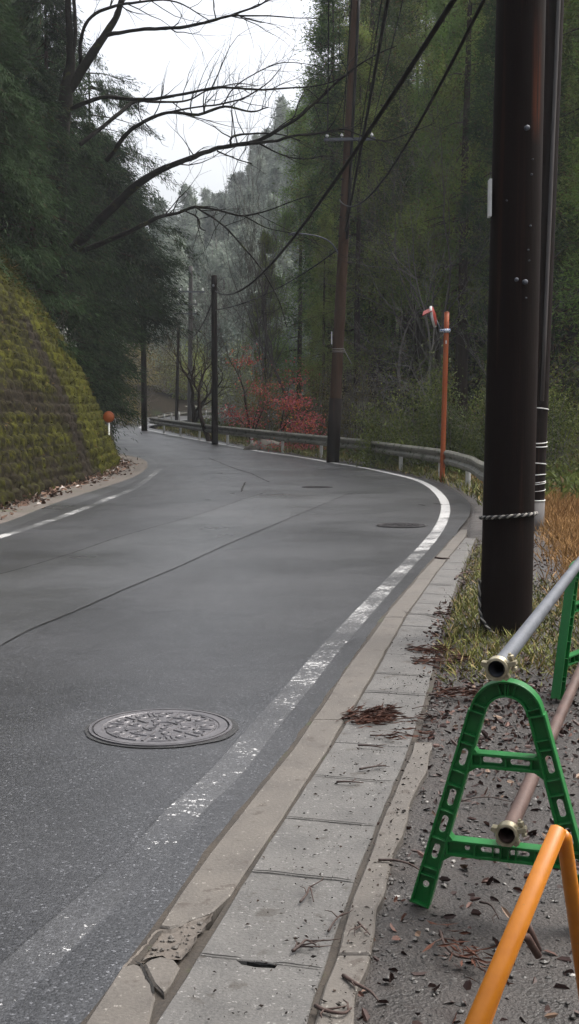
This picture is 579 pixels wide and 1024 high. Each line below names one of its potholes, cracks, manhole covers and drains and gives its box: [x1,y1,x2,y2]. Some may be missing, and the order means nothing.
crack [0,458,269,574]
manhole cover [84,708,239,748]
